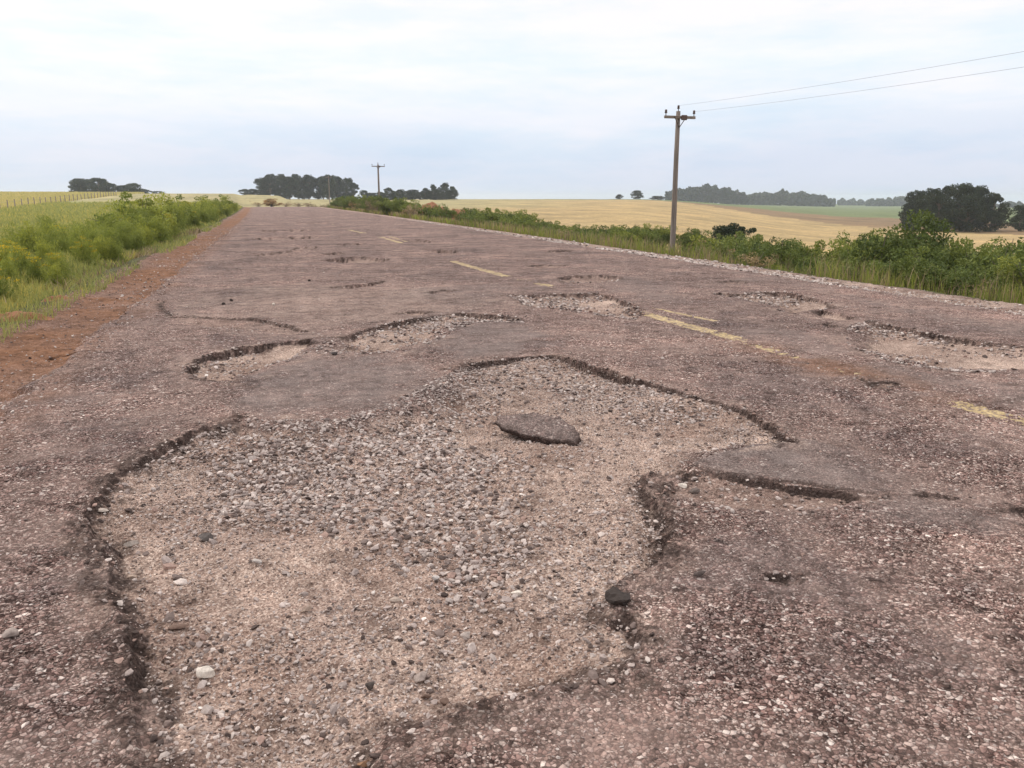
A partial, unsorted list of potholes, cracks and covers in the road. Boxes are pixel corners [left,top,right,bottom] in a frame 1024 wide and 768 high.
pothole [714,292,832,316]
pothole [309,313,524,355]
pothole [838,321,1024,373]
pothole [514,293,644,320]
pothole [762,572,808,587]
pothole [81,355,798,768]
pothole [185,339,322,384]
